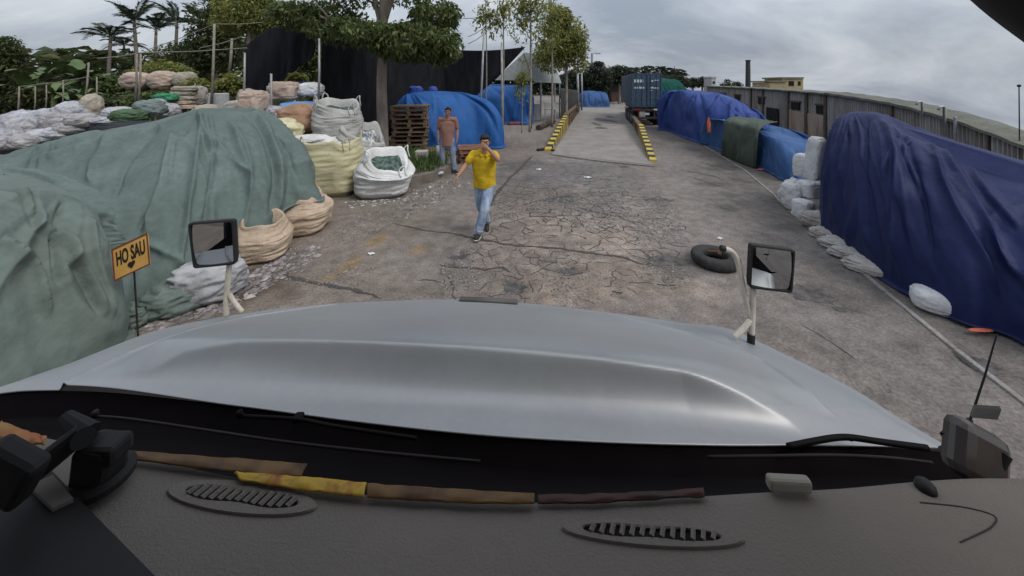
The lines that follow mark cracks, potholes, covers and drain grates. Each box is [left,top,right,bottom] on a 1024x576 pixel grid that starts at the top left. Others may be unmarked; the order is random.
crack [271,272,379,298]
crack [394,172,689,306]
